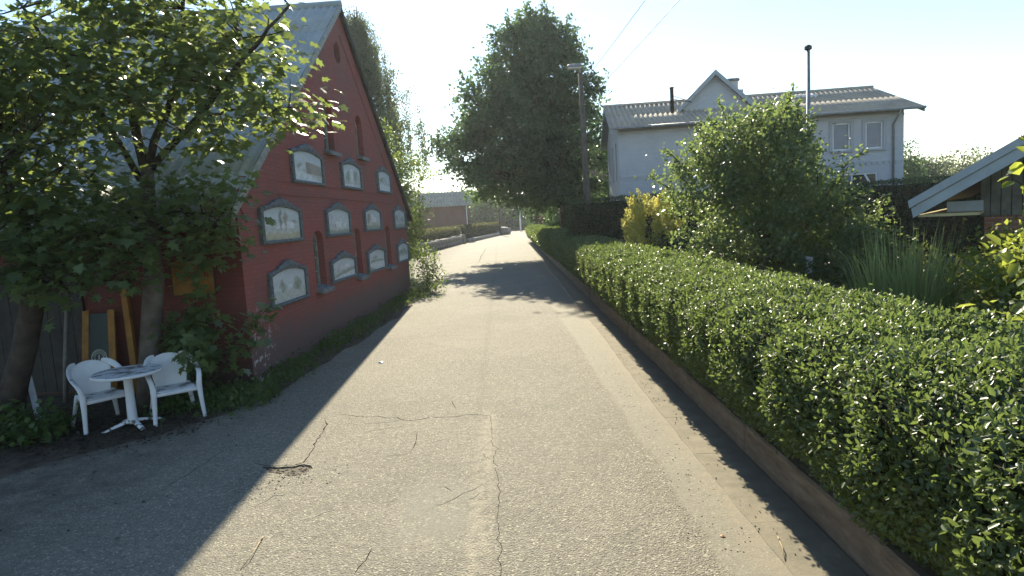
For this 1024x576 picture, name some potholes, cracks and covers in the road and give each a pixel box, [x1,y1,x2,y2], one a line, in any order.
pothole [263,464,312,476]
crack [255,401,503,576]
